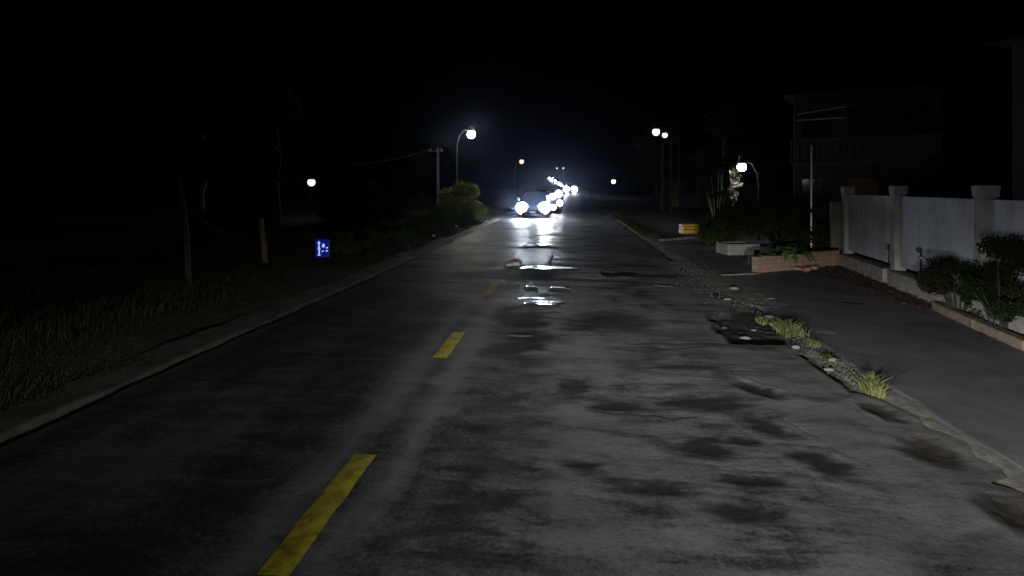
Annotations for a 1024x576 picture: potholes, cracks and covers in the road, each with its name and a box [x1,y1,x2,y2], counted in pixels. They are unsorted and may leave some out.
pothole [696,302,805,356]
